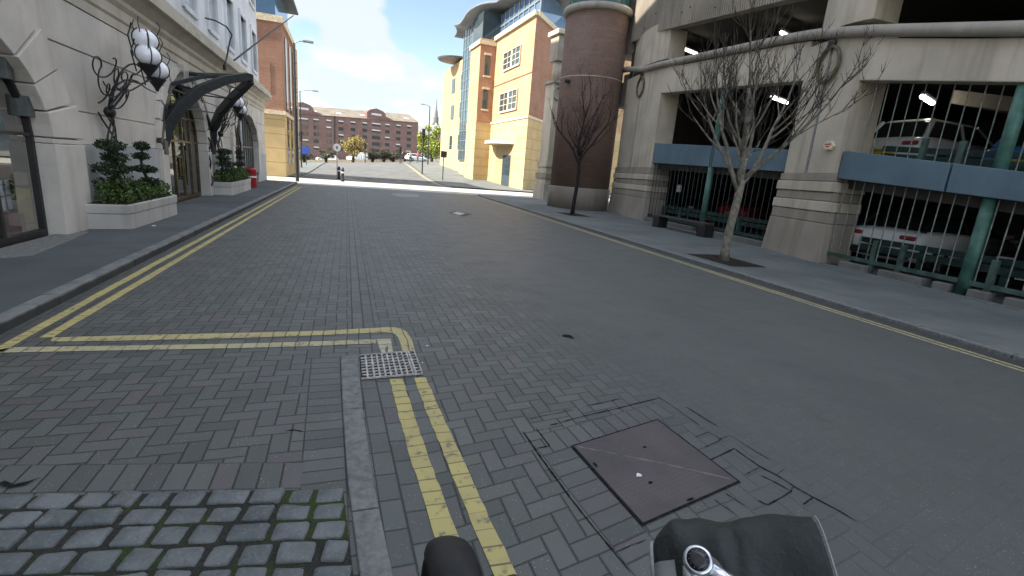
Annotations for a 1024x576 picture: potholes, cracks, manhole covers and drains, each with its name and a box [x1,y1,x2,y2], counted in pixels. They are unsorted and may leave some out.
drain grate [360,350,423,380]
crack [687,407,856,521]
manhole cover [571,419,740,526]
